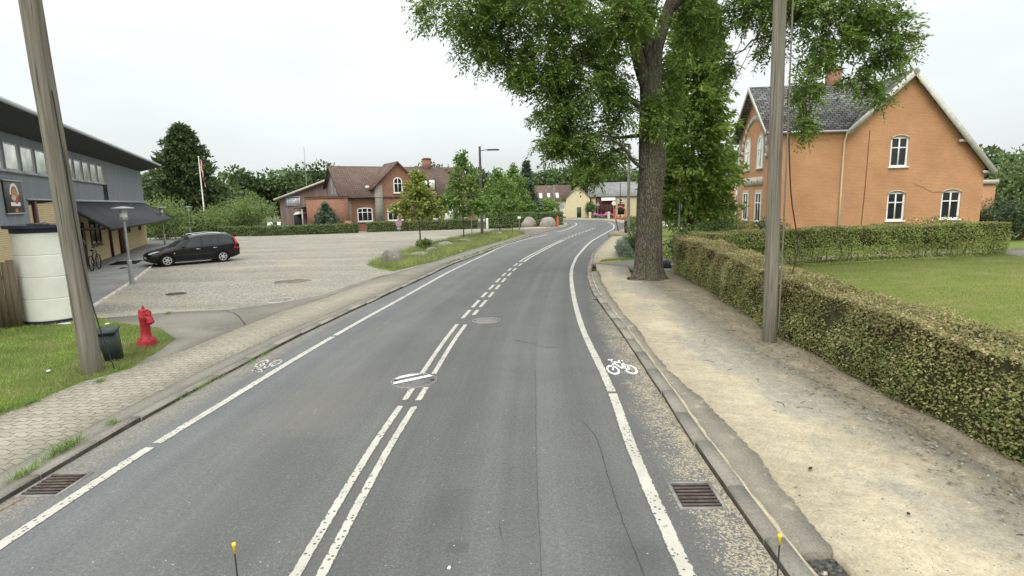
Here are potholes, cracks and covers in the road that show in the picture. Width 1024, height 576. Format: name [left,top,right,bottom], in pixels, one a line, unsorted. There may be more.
drain grate [666,481,728,510]
crack [584,423,645,576]
manhole cover [391,373,437,388]
drain grate [13,472,94,498]
